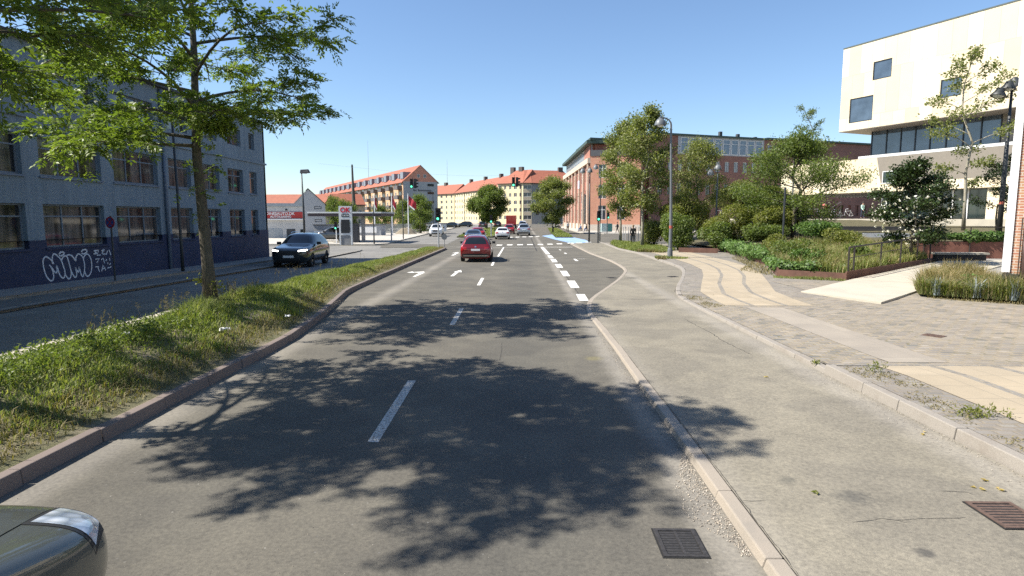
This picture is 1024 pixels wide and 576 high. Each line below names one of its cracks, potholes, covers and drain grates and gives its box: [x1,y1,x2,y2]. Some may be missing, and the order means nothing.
drain grate [962,501,1024,530]
drain grate [651,528,711,559]
